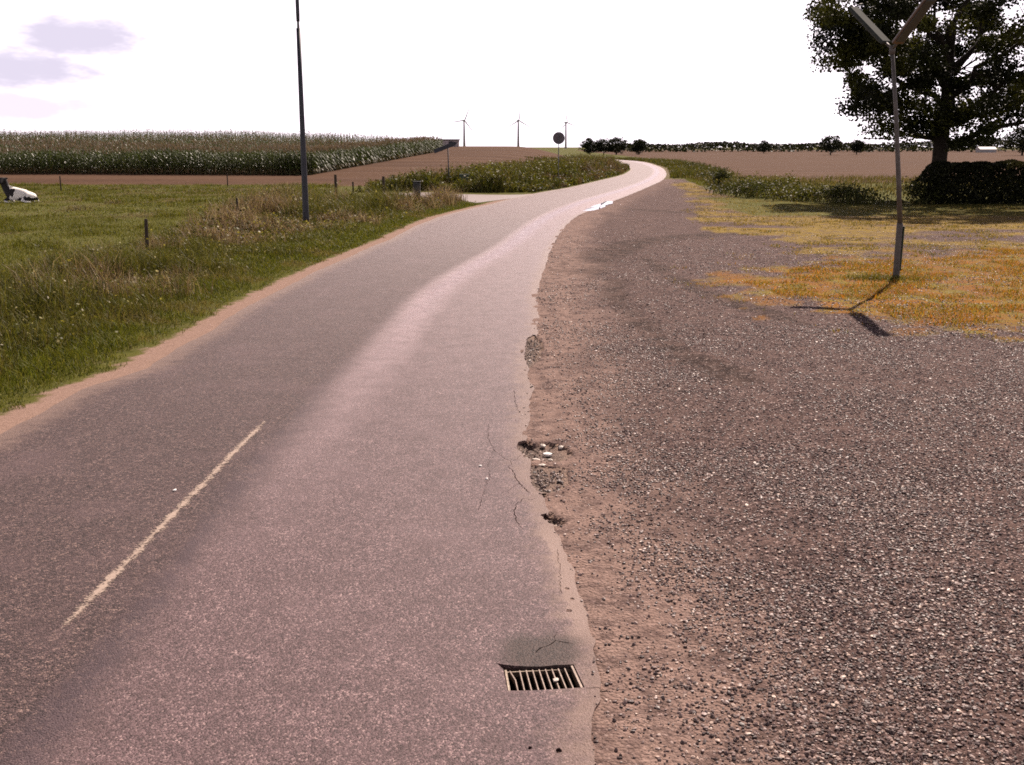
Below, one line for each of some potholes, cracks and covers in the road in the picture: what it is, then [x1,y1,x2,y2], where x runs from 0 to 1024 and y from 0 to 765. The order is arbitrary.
pothole [517,443,573,462]
pothole [525,336,543,368]
drain grate [504,666,583,691]
